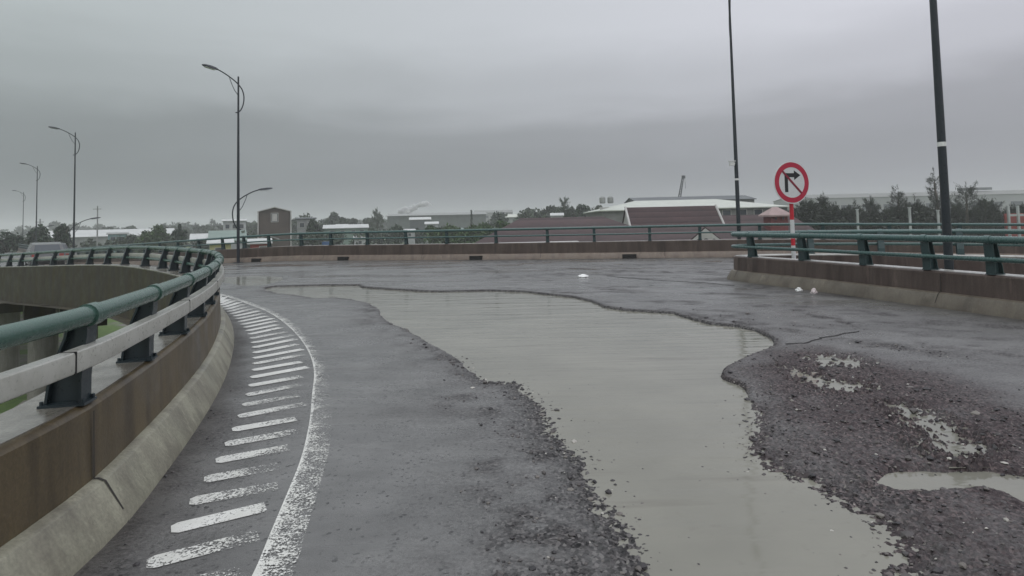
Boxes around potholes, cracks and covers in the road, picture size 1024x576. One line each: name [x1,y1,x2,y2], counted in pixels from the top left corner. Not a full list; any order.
pothole [246,284,1024,576]
crack [786,331,859,344]
